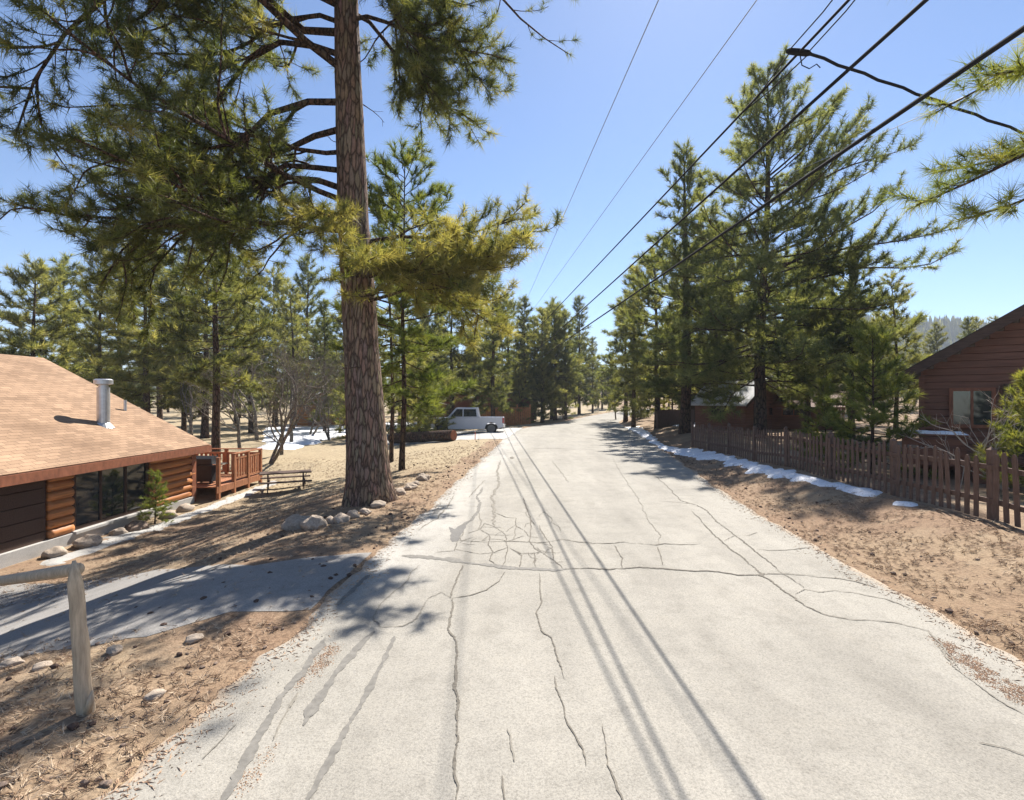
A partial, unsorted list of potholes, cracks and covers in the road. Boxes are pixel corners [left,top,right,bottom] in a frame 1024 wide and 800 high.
crack [373,460,1024,800]
